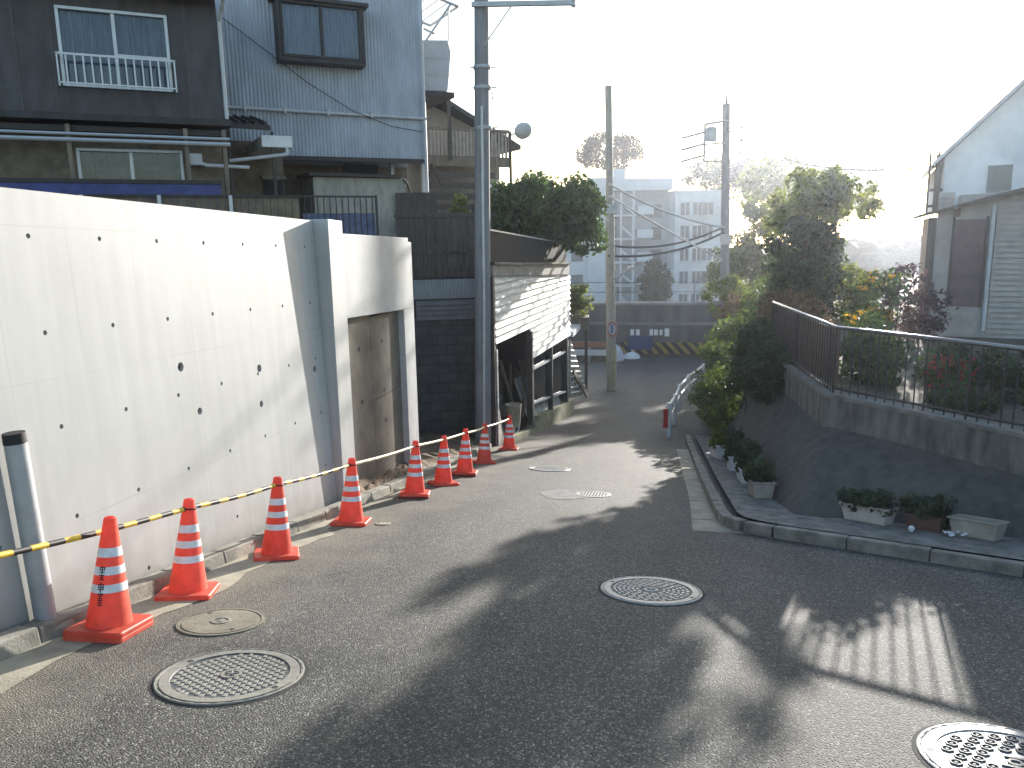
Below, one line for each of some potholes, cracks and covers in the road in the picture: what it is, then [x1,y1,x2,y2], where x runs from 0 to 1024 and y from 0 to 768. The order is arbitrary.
manhole cover [911,722,1024,768]
manhole cover [148,648,309,708]
manhole cover [598,576,706,607]
manhole cover [176,608,265,637]
